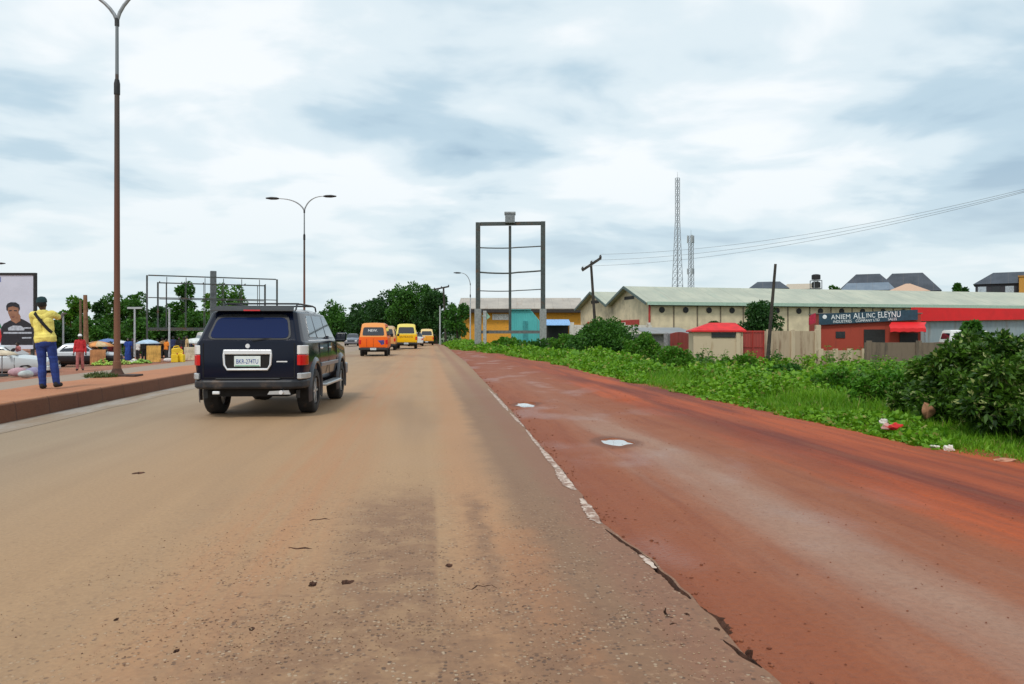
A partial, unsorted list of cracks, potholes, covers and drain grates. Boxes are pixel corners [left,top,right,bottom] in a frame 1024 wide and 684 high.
pothole [600,438,635,446]
